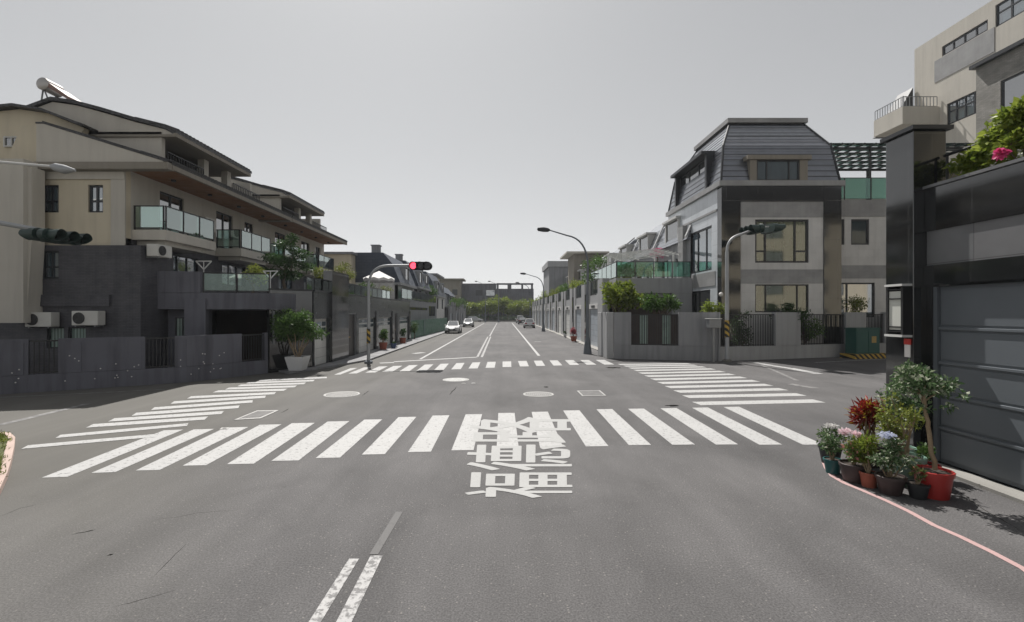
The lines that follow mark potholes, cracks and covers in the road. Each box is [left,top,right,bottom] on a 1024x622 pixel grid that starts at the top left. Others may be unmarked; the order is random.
utility cover [235,410,279,420]
